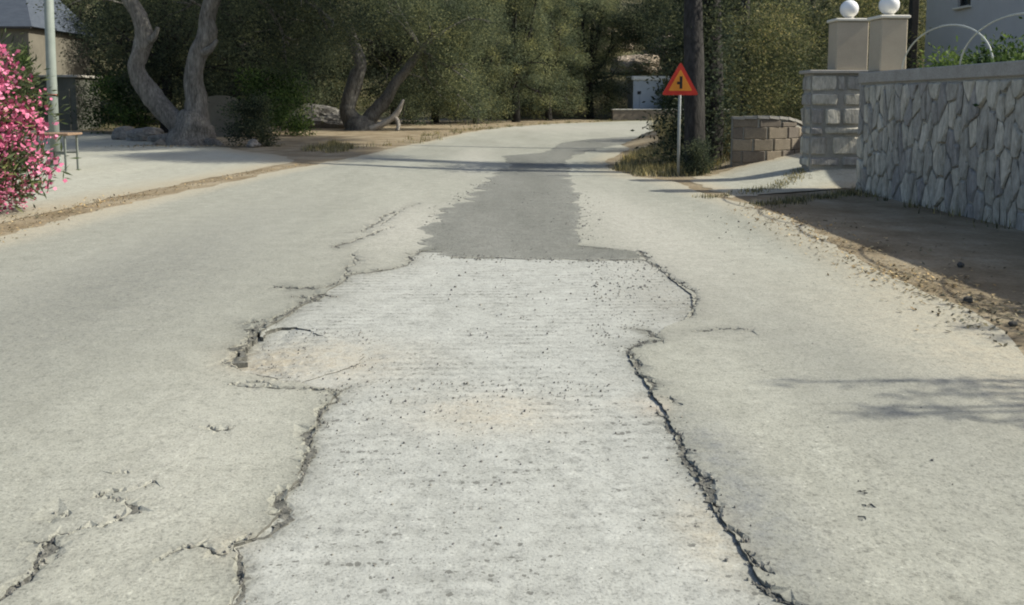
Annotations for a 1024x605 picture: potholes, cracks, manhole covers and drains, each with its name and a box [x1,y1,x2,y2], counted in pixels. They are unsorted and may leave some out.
crack [160,211,428,605]
crack [0,482,155,601]
crack [580,246,736,332]
crack [626,329,794,605]
